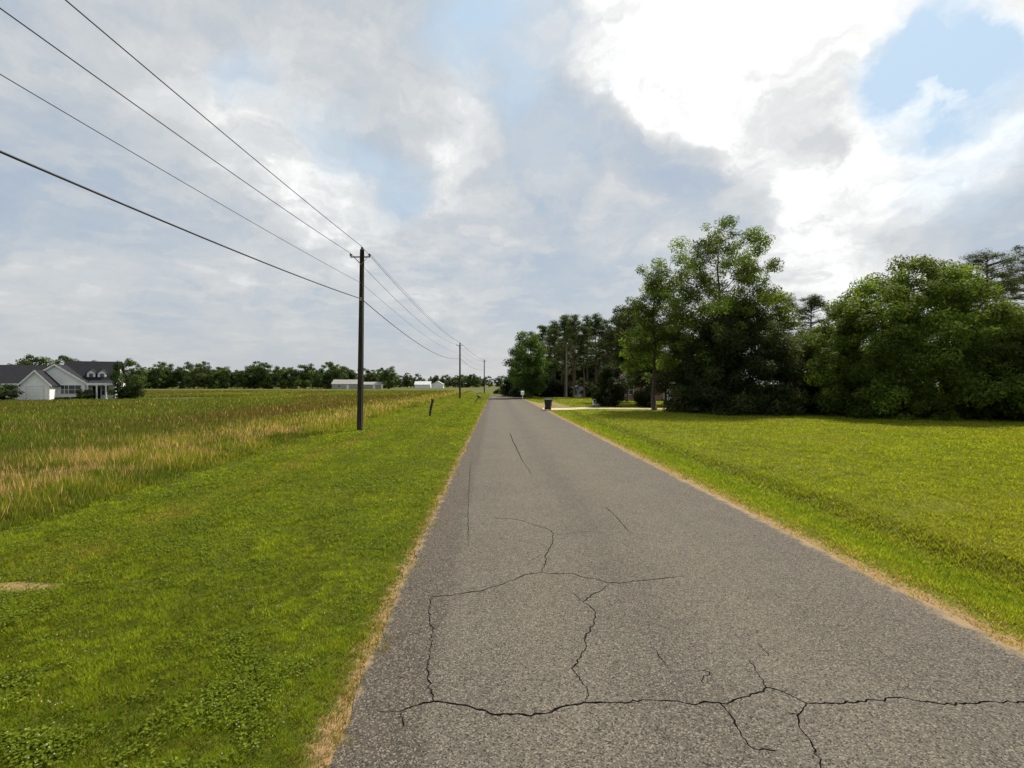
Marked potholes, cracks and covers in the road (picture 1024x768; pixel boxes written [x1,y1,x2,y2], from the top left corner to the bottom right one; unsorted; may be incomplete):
crack [378,518,1024,768]
